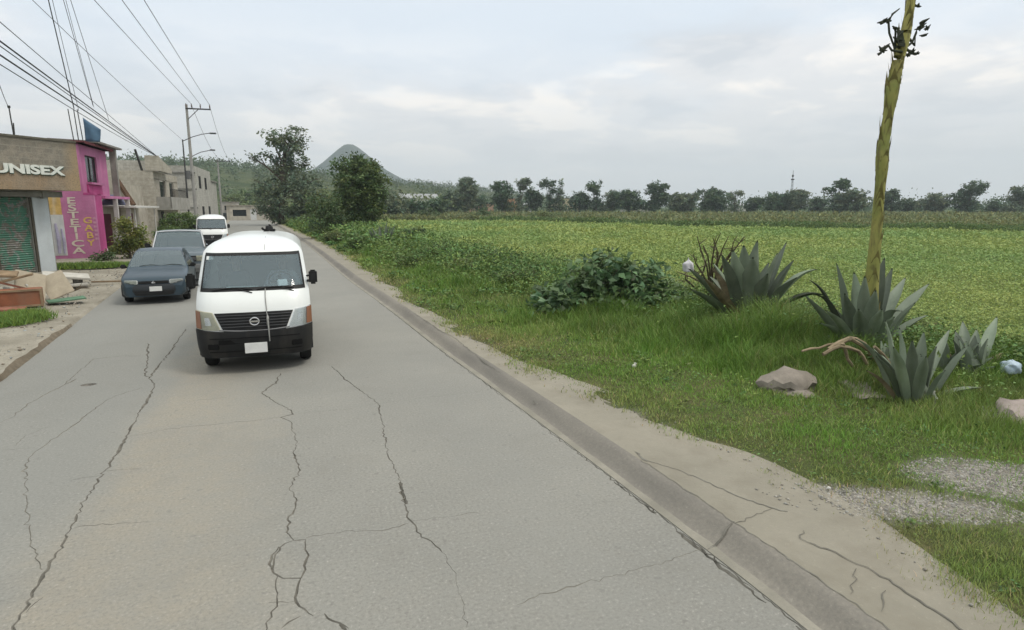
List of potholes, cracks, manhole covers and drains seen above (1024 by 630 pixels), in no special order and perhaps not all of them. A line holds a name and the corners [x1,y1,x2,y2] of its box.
crack [2,329,480,630]
